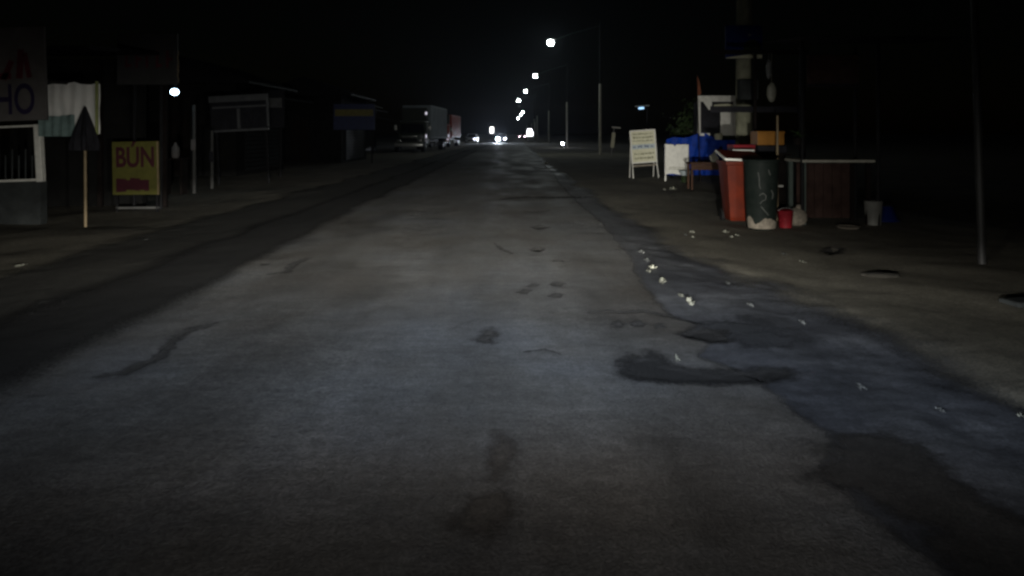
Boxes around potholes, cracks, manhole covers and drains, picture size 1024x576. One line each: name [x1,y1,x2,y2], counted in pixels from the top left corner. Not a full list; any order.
pothole [614,351,796,387]
crack [262,258,307,275]
crack [93,322,218,378]
pothole [476,328,499,344]
